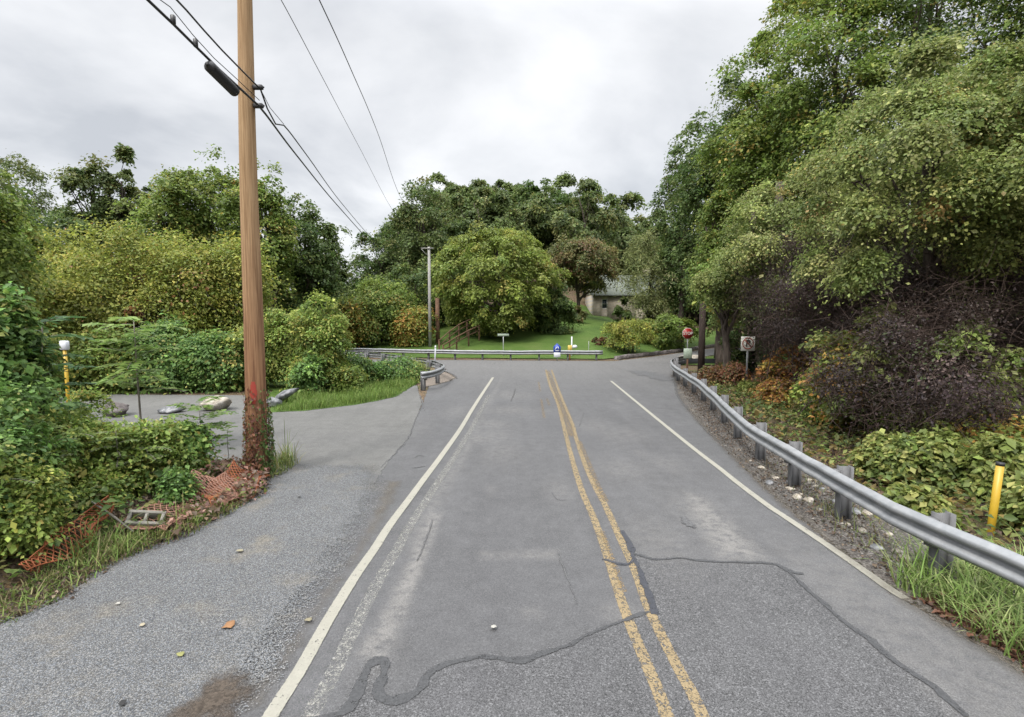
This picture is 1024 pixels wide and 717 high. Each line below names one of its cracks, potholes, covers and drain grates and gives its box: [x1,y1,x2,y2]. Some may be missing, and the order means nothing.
crack [417,519,433,561]
